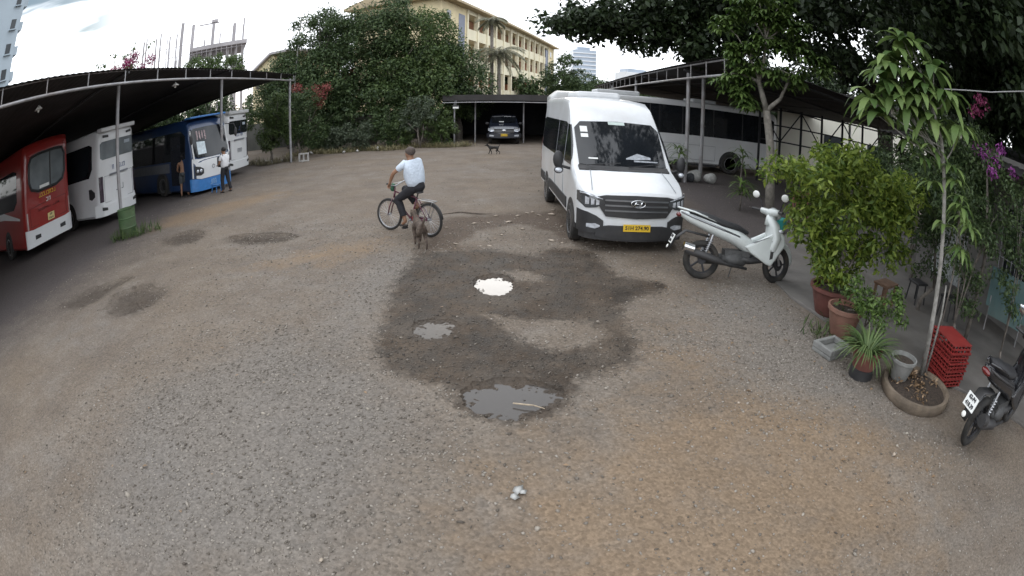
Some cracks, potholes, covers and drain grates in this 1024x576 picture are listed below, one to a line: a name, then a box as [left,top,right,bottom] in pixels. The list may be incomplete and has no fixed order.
pothole [460,376,567,421]
pothole [472,273,514,296]
pothole [411,318,462,340]
